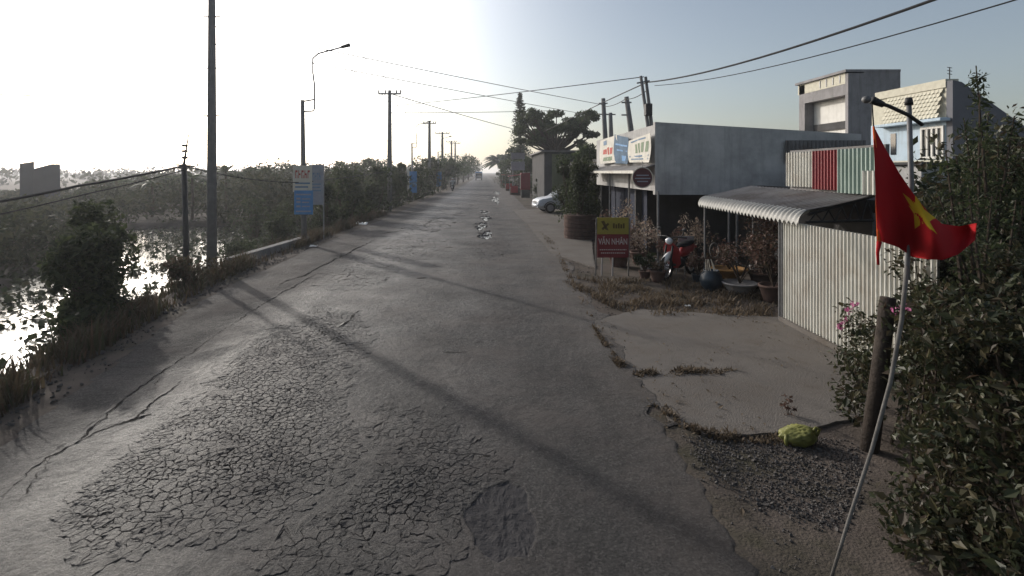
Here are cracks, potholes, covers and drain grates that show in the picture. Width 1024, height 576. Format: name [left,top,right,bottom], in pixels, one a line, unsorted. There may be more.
crack [0,203,515,576]
pothole [459,474,543,571]
